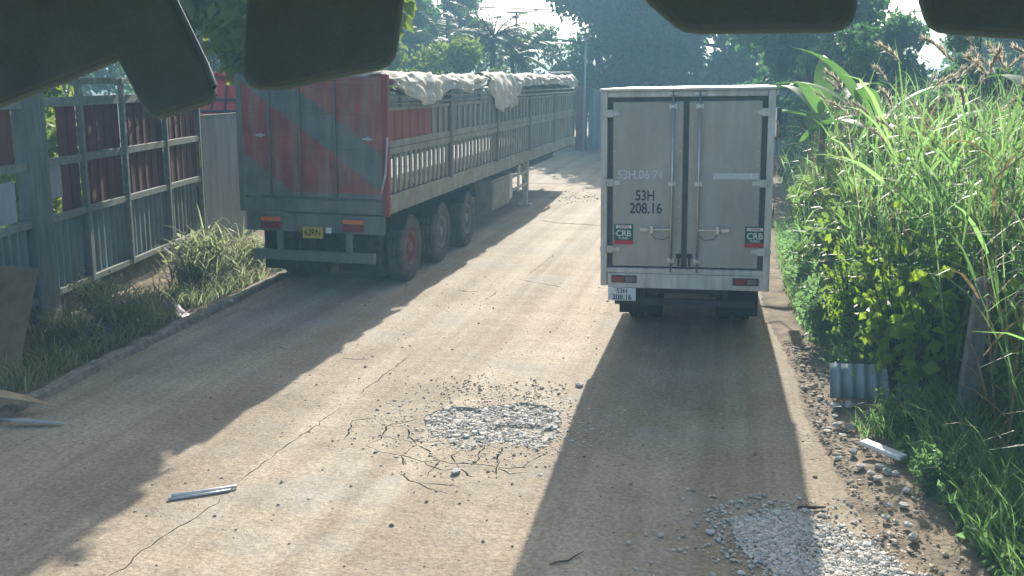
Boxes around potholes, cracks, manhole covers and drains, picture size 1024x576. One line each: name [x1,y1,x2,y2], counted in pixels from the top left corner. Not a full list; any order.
crack [241,409,546,493]
pothole [423,402,562,451]
crack [109,498,220,576]
